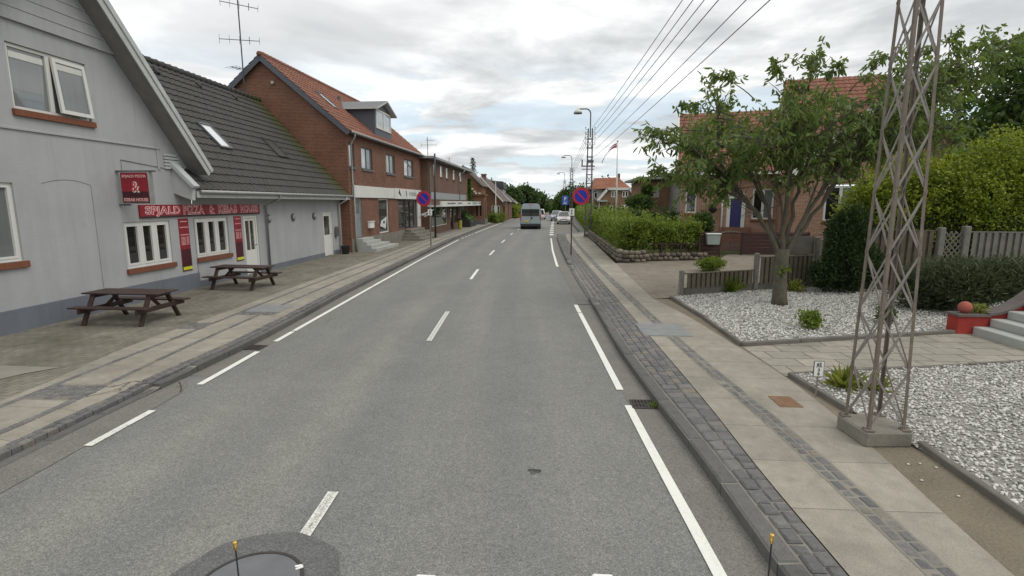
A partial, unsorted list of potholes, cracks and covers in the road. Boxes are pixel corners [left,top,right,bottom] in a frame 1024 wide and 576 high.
manhole cover [205,551,304,576]
utility cover [768,396,803,408]
utility cover [635,323,693,337]
drain grate [629,399,658,409]
